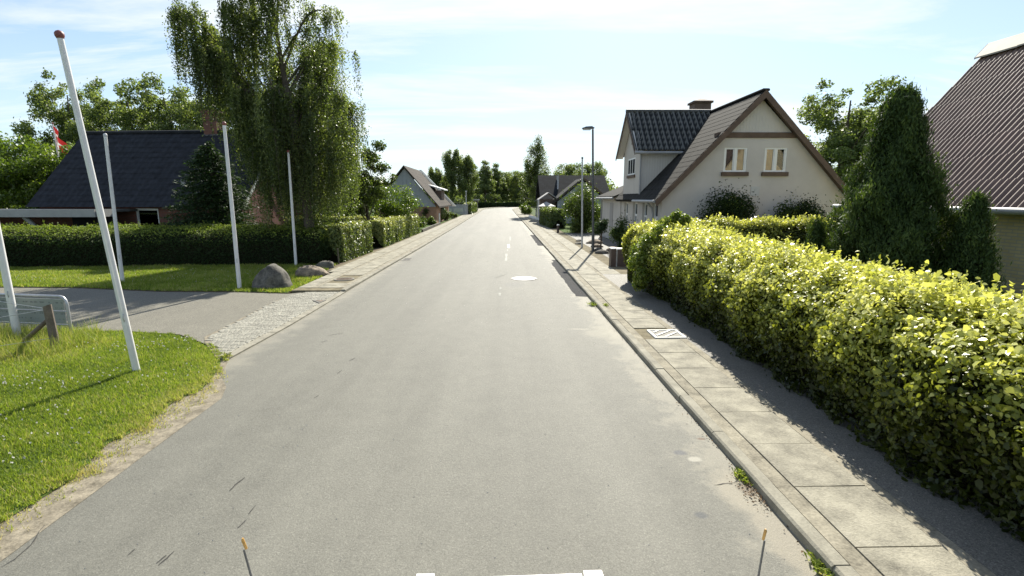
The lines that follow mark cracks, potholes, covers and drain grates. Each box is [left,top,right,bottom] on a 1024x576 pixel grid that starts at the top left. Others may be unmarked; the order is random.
crack [157,360,350,564]
